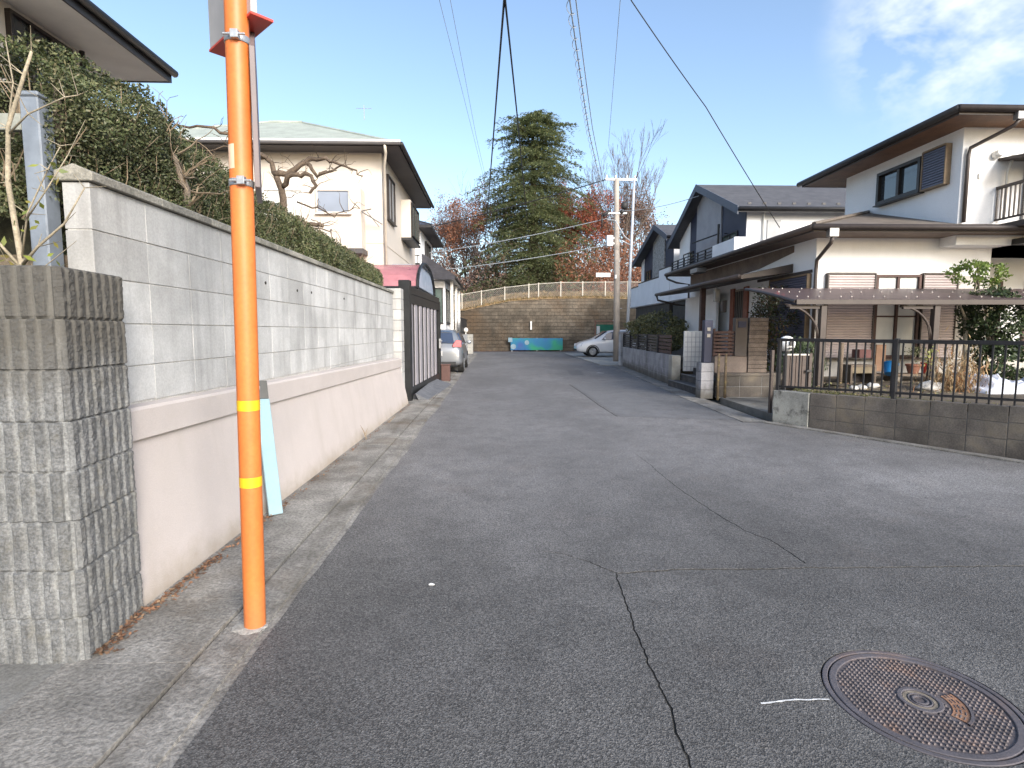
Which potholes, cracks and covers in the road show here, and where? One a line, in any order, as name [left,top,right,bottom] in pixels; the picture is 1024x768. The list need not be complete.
manhole cover [822,650,1024,768]
crack [567,459,1020,768]
